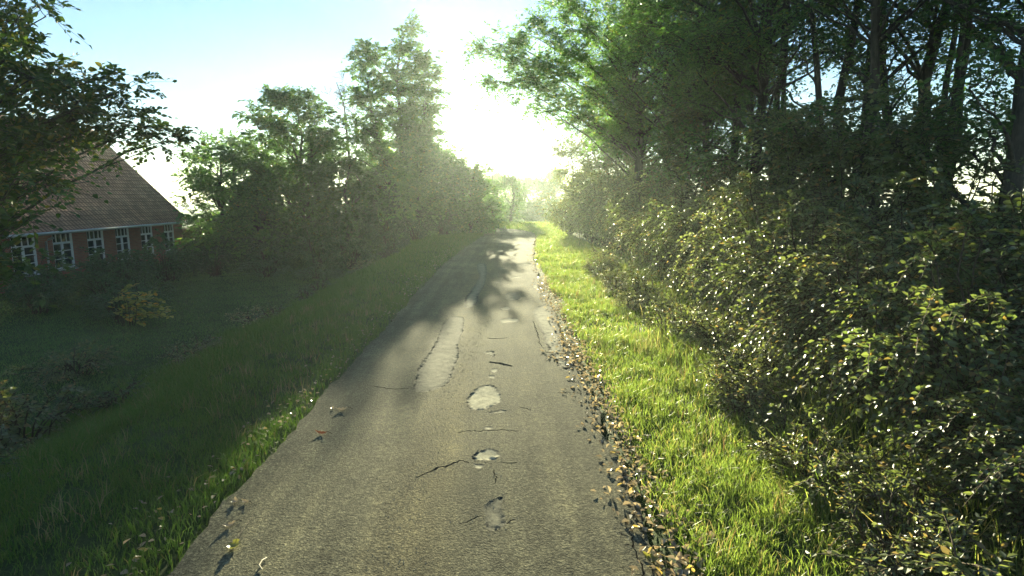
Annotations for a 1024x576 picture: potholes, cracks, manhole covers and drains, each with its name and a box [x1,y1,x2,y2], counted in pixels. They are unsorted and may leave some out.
pothole [471,448,501,461]
pothole [483,497,506,531]
pothole [466,385,502,411]
crack [416,460,469,478]
